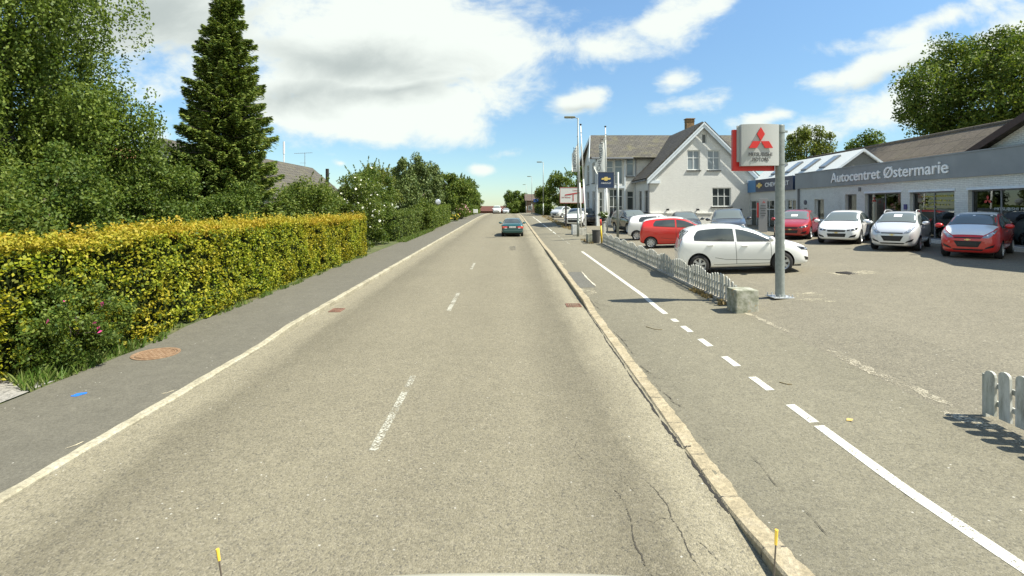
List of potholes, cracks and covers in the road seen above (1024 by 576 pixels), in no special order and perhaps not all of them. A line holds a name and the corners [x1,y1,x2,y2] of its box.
crack [607,365,731,576]
manhole cover [130,347,181,361]
